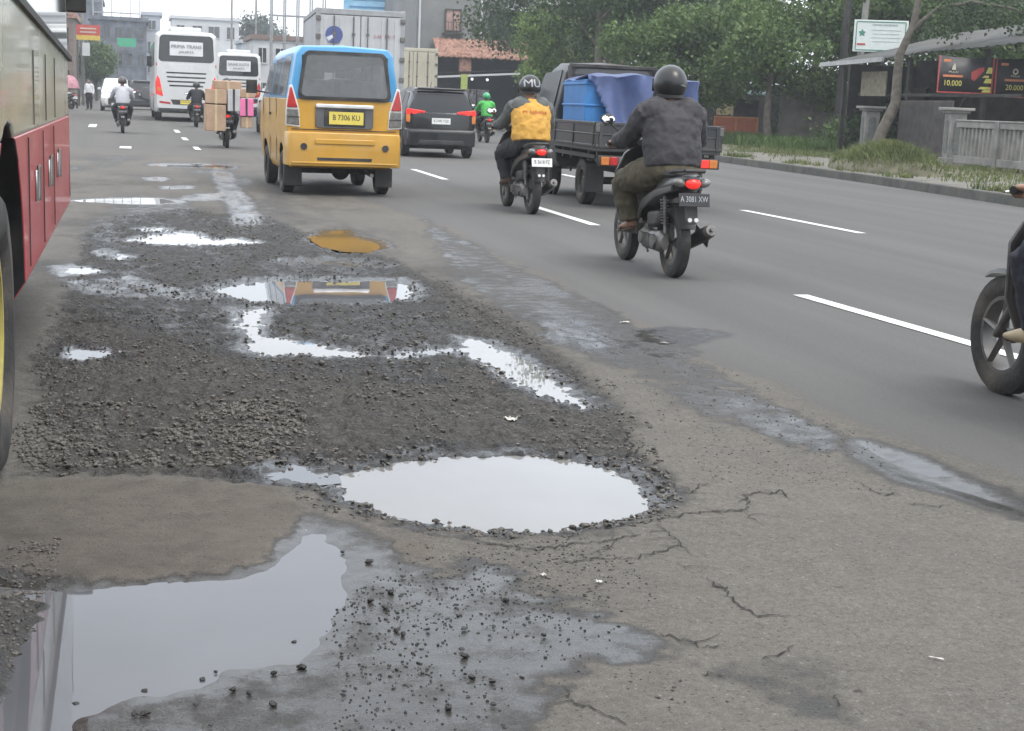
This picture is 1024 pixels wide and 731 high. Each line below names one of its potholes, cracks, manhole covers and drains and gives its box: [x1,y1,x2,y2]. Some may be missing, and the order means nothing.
pothole [371,342,460,359]
pothole [333,450,661,534]
pothole [454,335,593,410]
pothole [0,526,360,731]
pothole [127,231,261,246]
crack [659,632,725,647]
pothole [74,197,181,205]
pothole [228,304,373,358]
pothole [73,276,223,300]
pothole [62,343,118,360]
